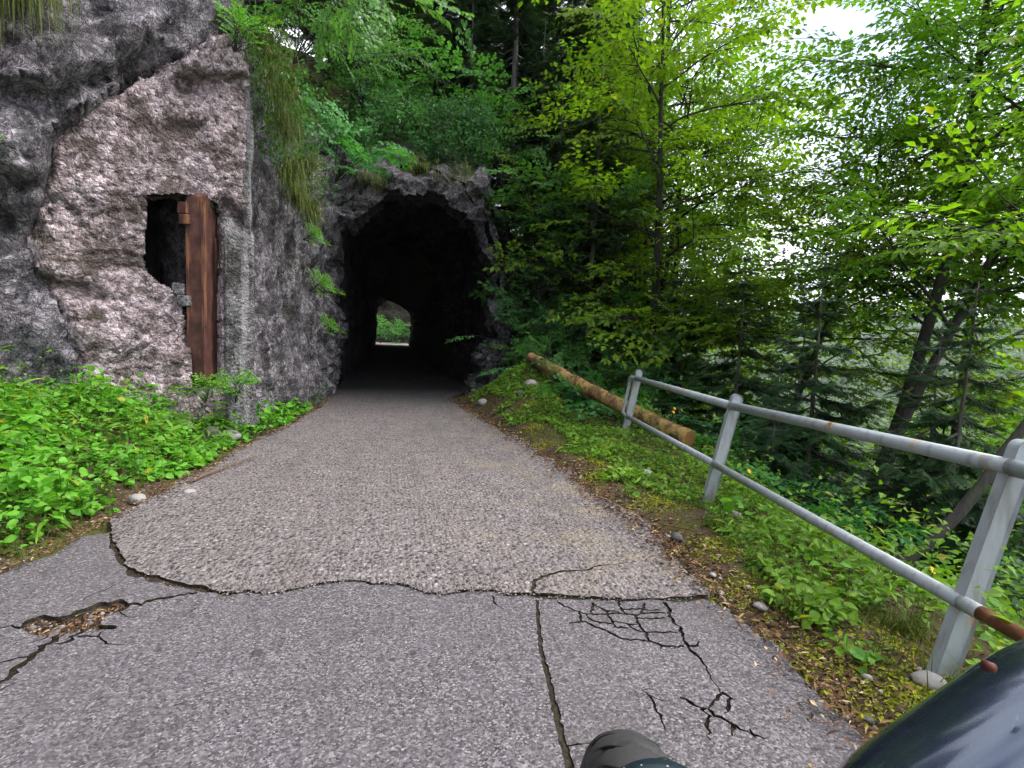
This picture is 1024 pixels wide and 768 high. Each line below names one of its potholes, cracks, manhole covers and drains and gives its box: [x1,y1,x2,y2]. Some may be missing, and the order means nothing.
crack [531,561,764,768]
crack [0,580,197,691]
pothole [20,599,129,636]
